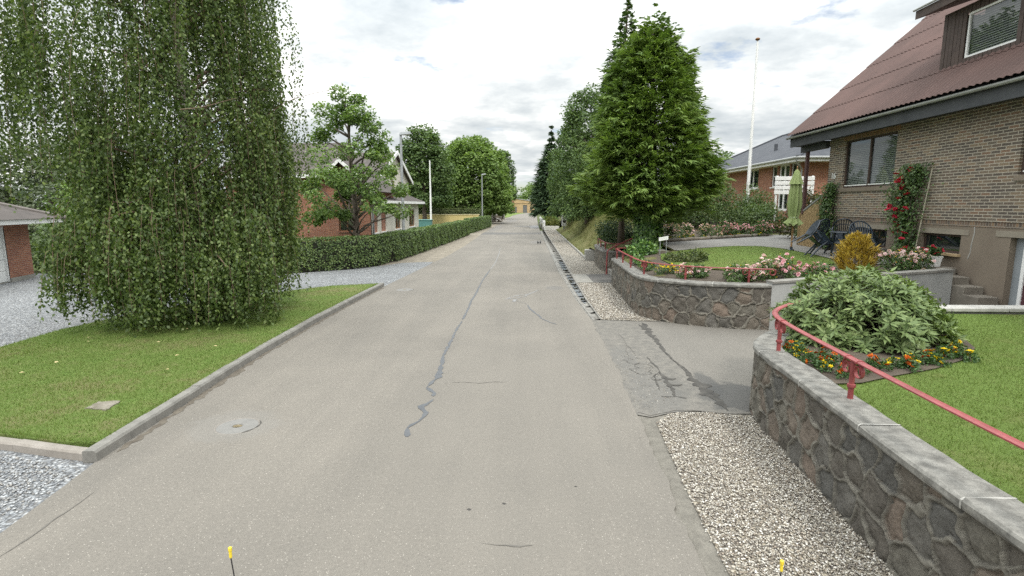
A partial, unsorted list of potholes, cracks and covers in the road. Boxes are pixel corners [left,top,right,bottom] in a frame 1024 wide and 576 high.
crack [2,493,92,555]
crack [619,334,732,415]
manhole cover [214,418,262,435]
